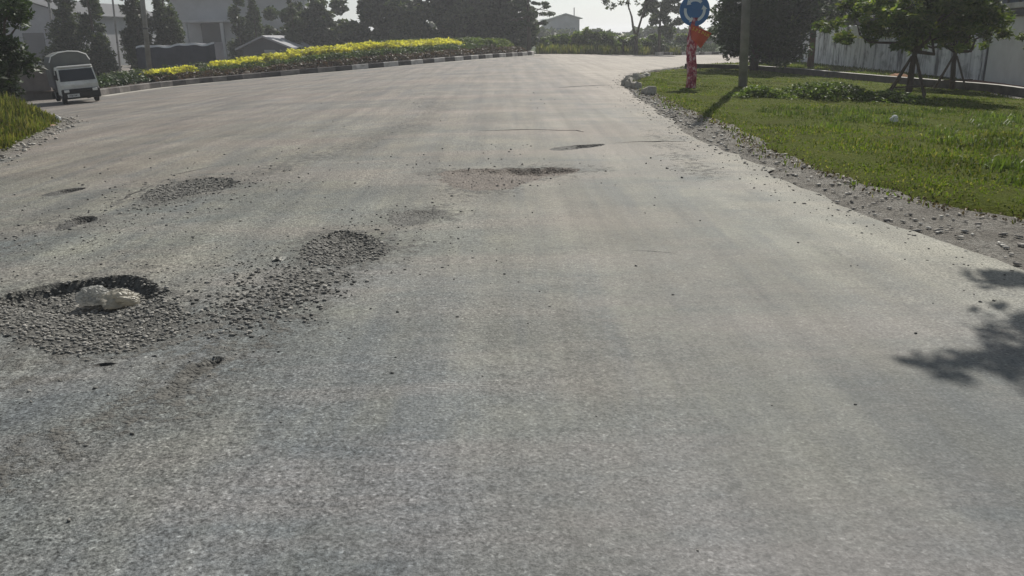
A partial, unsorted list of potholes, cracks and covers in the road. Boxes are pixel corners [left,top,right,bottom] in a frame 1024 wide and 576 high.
pothole [138,177,239,202]
pothole [55,216,98,231]
pothole [154,356,224,401]
pothole [299,229,395,266]
pothole [437,167,580,191]
pothole [0,274,194,356]
pothole [41,187,86,196]
